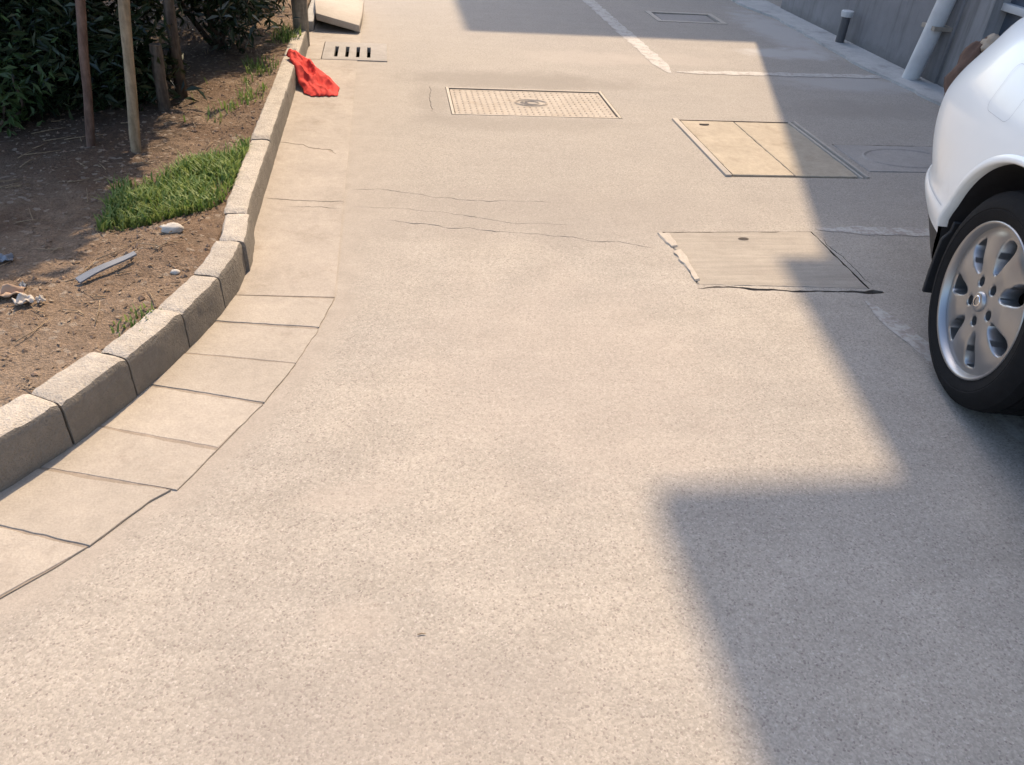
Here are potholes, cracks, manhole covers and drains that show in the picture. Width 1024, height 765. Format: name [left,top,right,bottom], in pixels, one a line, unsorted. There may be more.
manhole cover [657,232,870,291]
manhole cover [672,118,870,179]
manhole cover [645,11,727,24]
drain grate [321,42,387,62]
manhole cover [445,87,622,119]
manhole cover [833,145,933,179]
crack [366,189,651,248]
